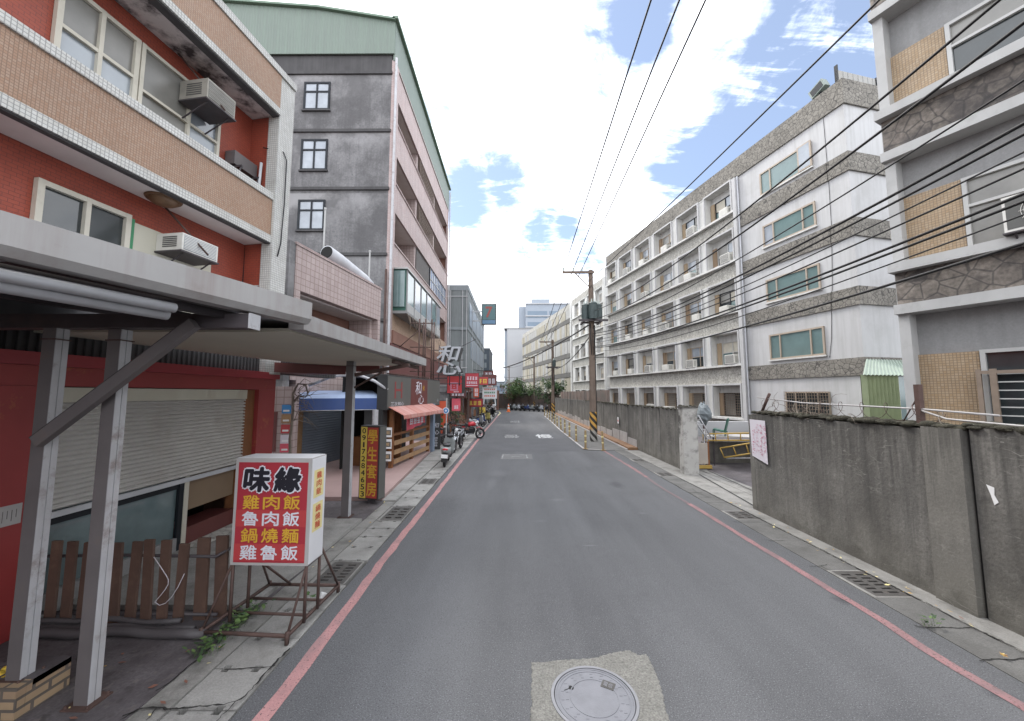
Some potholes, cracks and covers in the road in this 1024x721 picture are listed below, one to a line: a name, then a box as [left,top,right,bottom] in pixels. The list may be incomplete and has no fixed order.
drain grate [309,561,365,587]
manhole cover [551,666,640,721]
drain grate [826,570,914,598]
drain grate [721,511,761,520]
drain grate [377,507,415,522]
